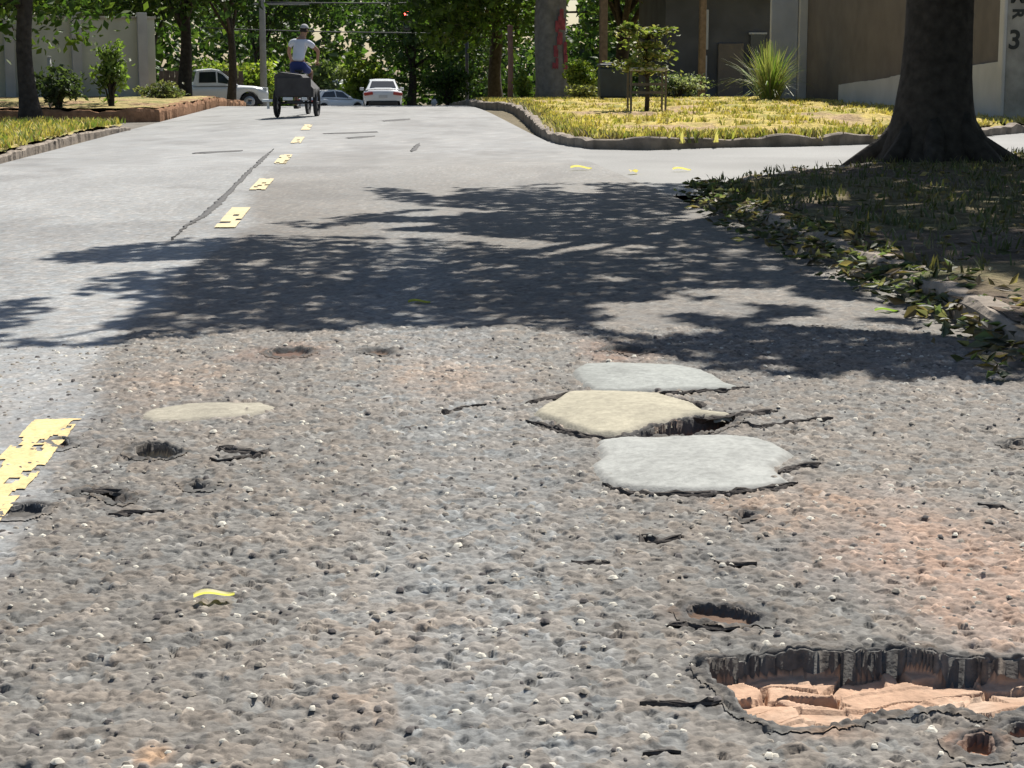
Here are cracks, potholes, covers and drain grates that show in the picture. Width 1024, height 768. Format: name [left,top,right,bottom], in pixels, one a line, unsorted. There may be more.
pothole [667,597,779,629]
pothole [0,499,59,521]
pothole [66,484,140,506]
pothole [356,346,401,357]
crack [659,386,833,429]
pothole [259,345,321,359]
crack [640,697,722,707]
crack [639,533,682,544]
pothole [174,478,219,493]
pothole [120,440,192,461]
pothole [937,725,1017,767]
